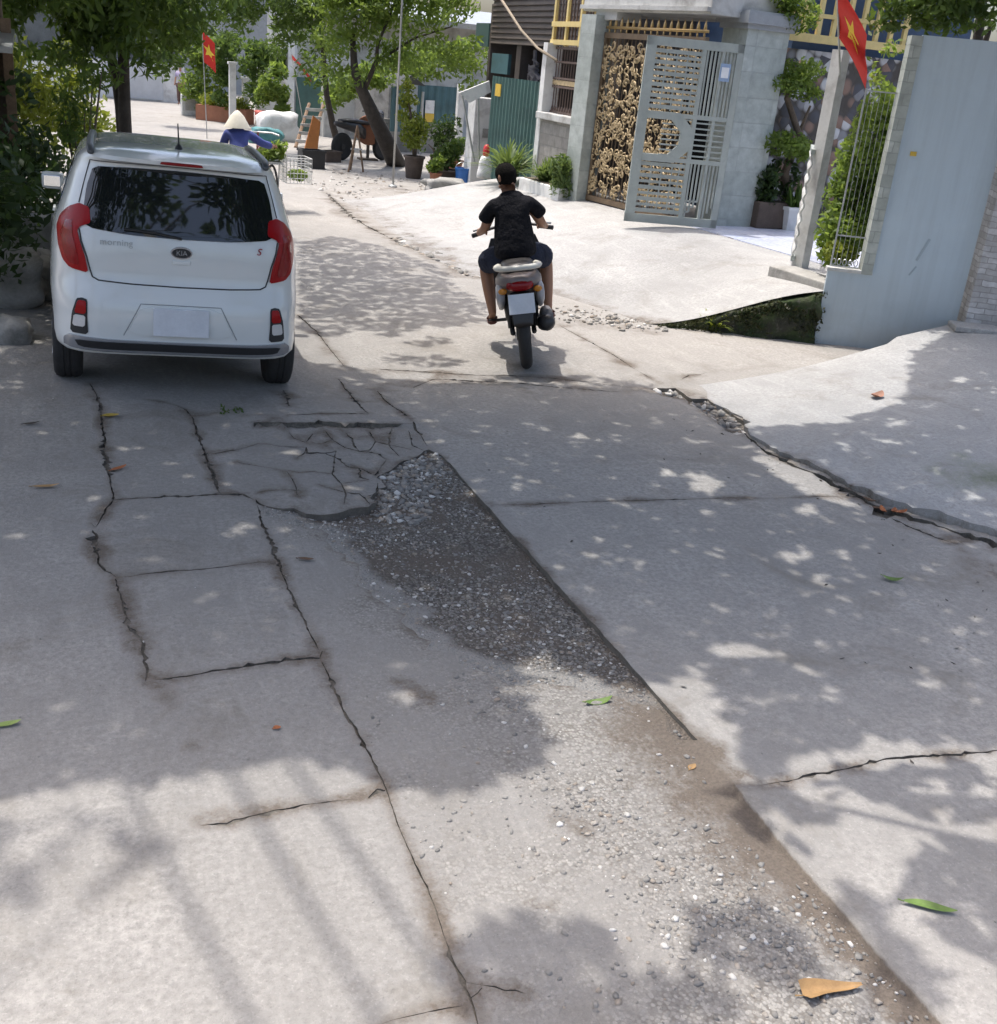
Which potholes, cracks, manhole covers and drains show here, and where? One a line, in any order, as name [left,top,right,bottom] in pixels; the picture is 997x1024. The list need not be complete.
crack [744,433,997,548]
crack [200,789,385,826]
crack [385,982,523,1023]
crack [215,391,426,504]
